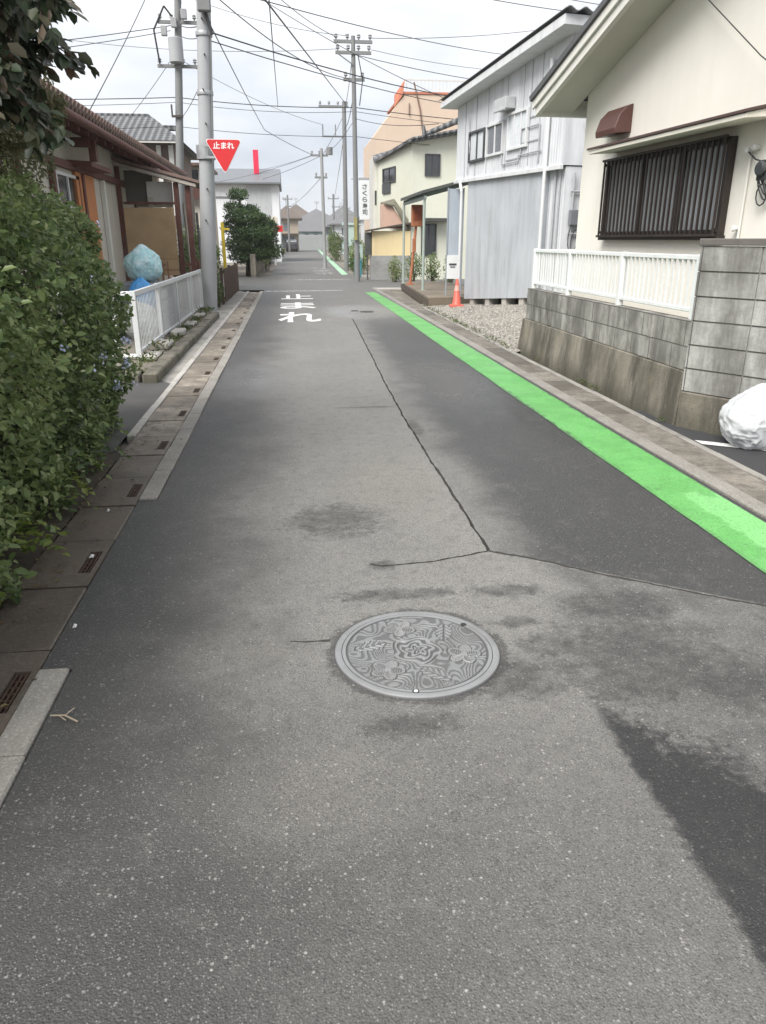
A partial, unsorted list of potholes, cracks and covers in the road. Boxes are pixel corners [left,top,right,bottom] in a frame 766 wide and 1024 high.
manhole cover [334,611,501,700]
crack [353,319,766,607]
